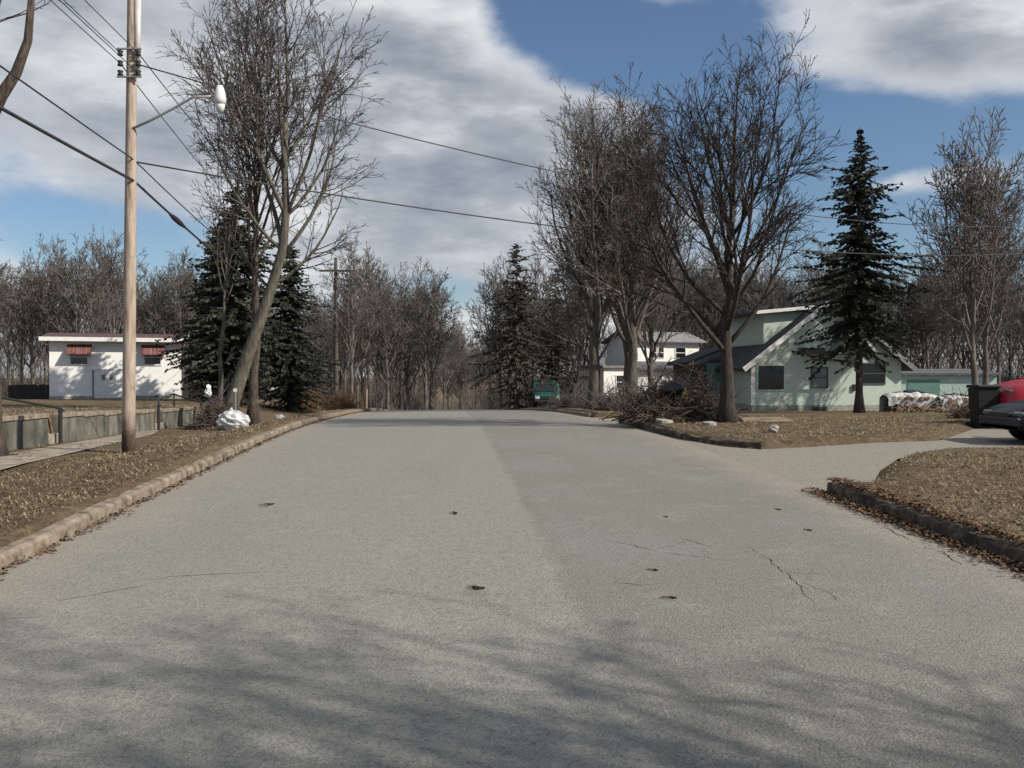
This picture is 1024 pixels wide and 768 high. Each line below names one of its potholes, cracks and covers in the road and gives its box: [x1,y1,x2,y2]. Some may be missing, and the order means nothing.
crack [759,553,838,604]
crack [4,571,266,620]
